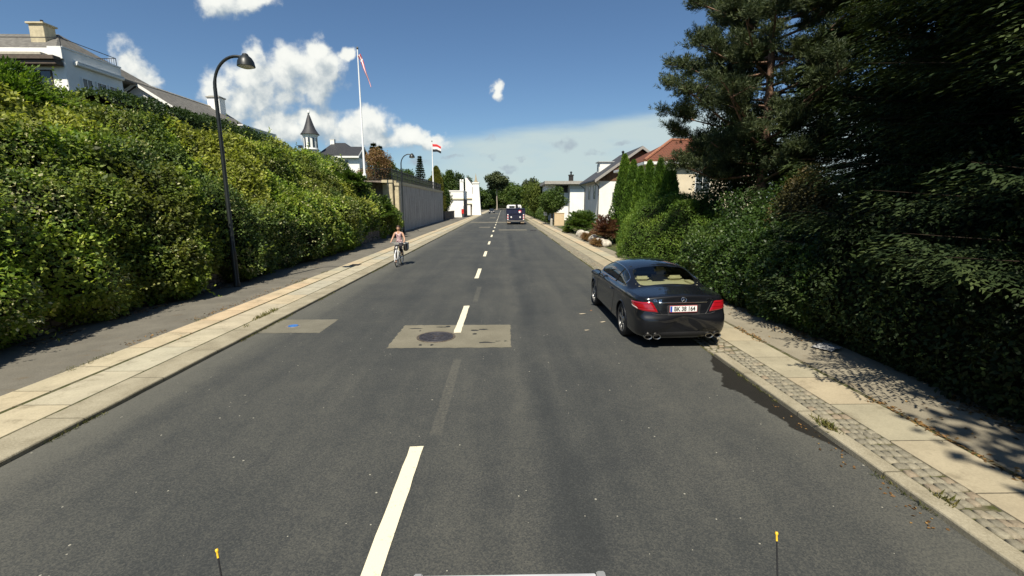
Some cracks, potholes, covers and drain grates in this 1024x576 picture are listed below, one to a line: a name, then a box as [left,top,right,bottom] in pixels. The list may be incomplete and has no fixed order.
manhole cover [416,331,456,343]
